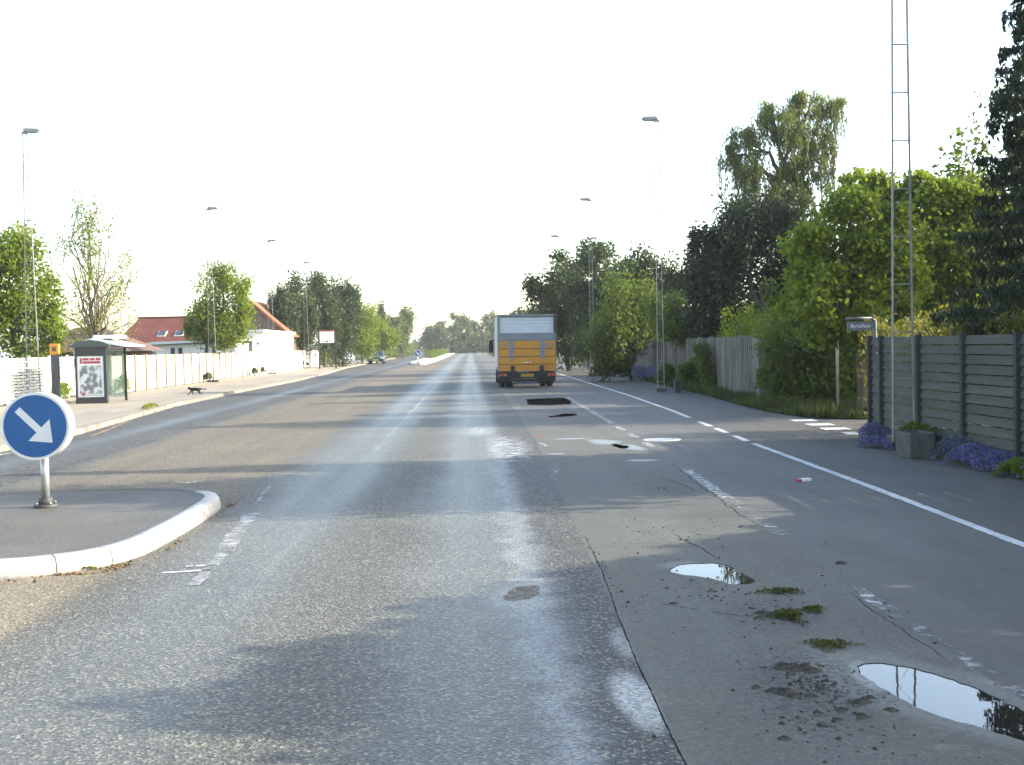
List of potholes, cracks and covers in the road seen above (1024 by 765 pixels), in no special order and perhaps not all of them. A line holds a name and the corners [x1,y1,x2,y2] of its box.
pothole [857,663,1024,741]
crack [849,591,949,662]
crack [661,466,768,532]
pothole [670,563,755,584]
crack [585,537,772,765]
